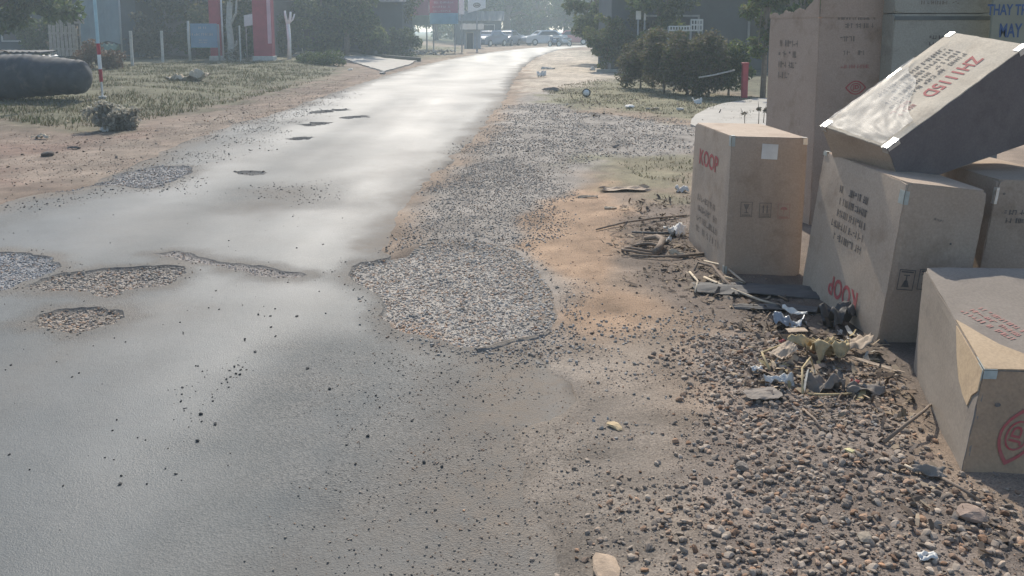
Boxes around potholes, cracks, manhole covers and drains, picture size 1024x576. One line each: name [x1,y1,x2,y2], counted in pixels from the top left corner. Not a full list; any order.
pothole [24,265,186,299]
pothole [38,165,193,192]
pothole [30,307,125,334]
pothole [0,252,62,291]
pothole [348,239,558,348]
pothole [154,251,307,278]
